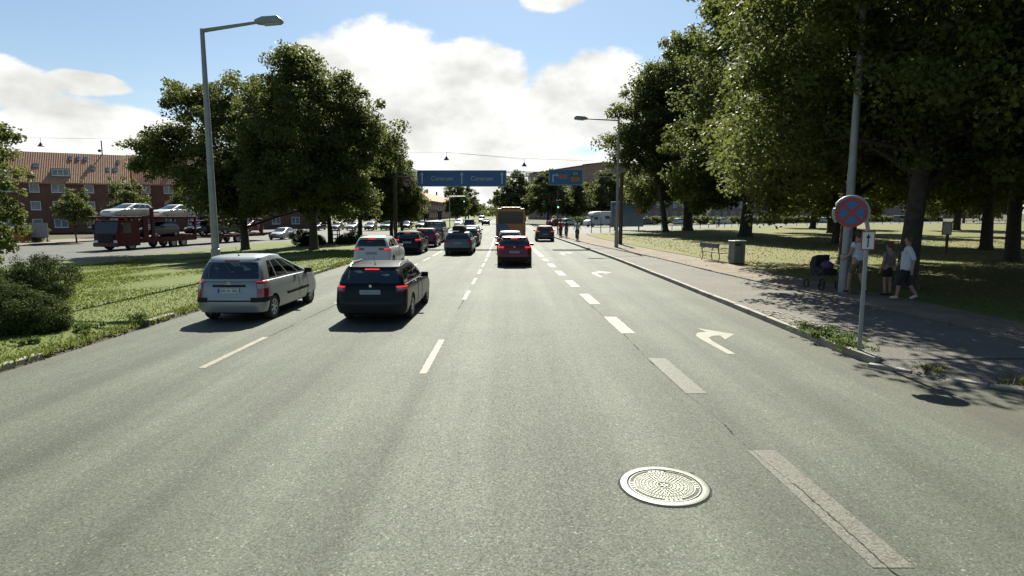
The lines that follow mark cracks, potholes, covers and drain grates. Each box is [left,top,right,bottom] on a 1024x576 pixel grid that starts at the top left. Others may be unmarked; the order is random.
manhole cover [618,467,712,508]
